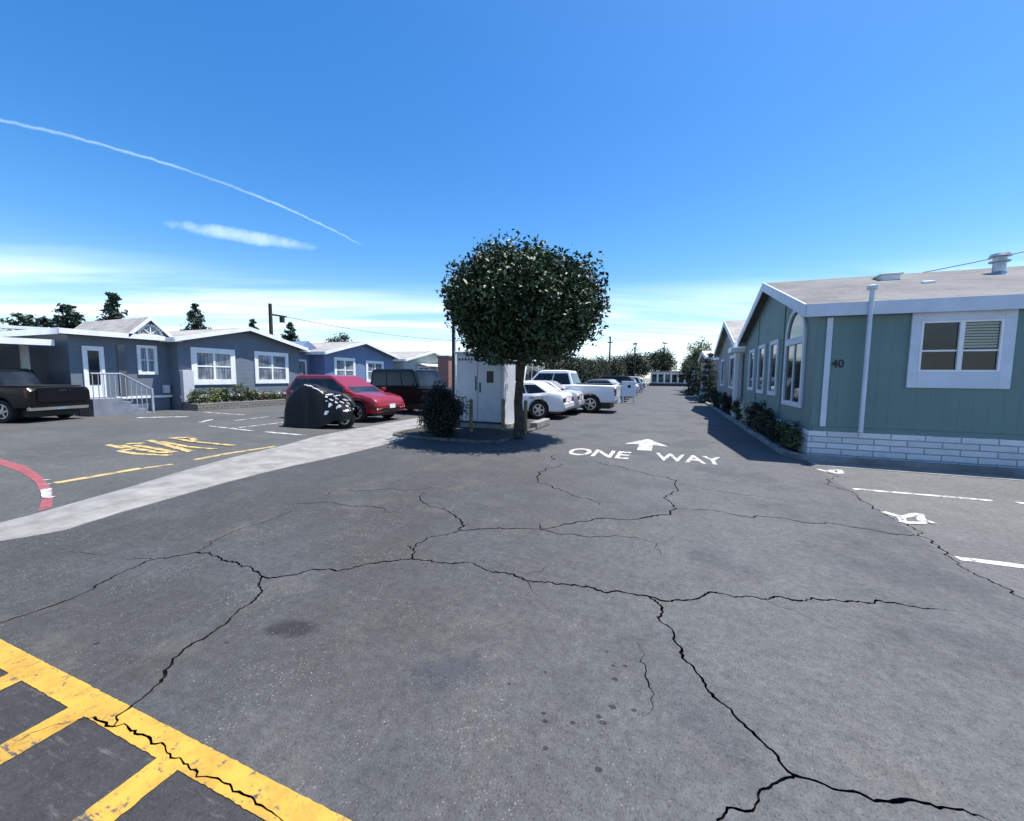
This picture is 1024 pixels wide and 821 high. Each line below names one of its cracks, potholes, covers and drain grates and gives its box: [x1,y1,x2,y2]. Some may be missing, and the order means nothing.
crack [1,461,992,821]
